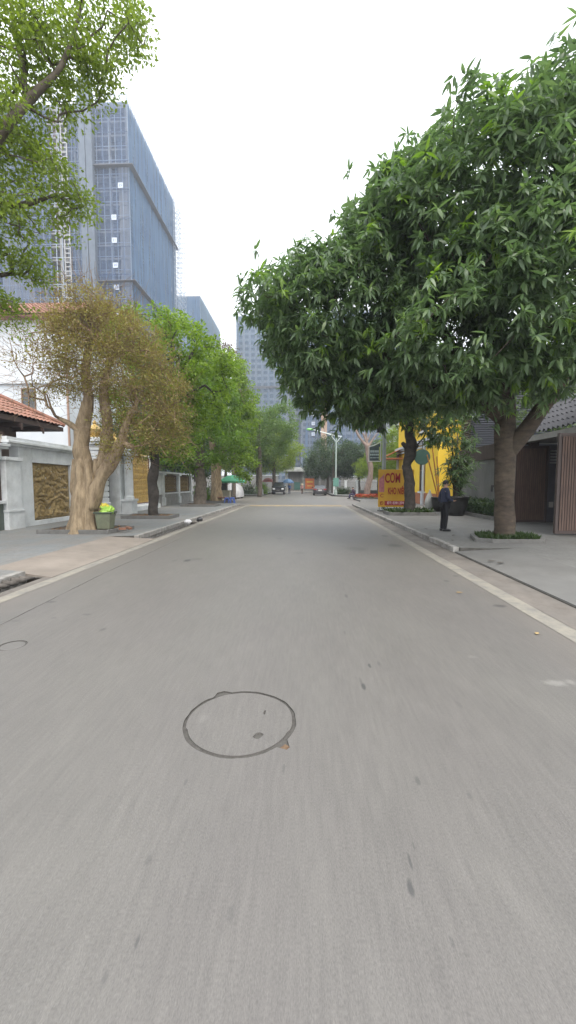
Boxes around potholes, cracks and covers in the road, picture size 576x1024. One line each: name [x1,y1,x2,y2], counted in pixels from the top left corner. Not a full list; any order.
manhole cover [183,691,296,759]
manhole cover [0,640,28,651]
